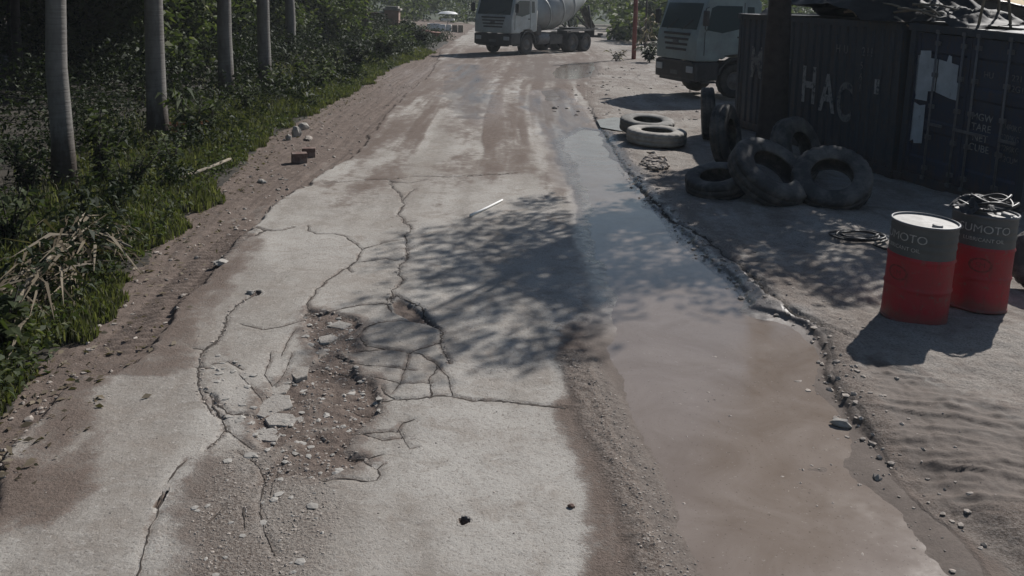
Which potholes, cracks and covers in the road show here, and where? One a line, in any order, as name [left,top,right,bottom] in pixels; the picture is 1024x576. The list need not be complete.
crack [193,173,566,556]
crack [136,461,186,576]
pothole [387,297,440,331]
pothole [243,307,385,492]
